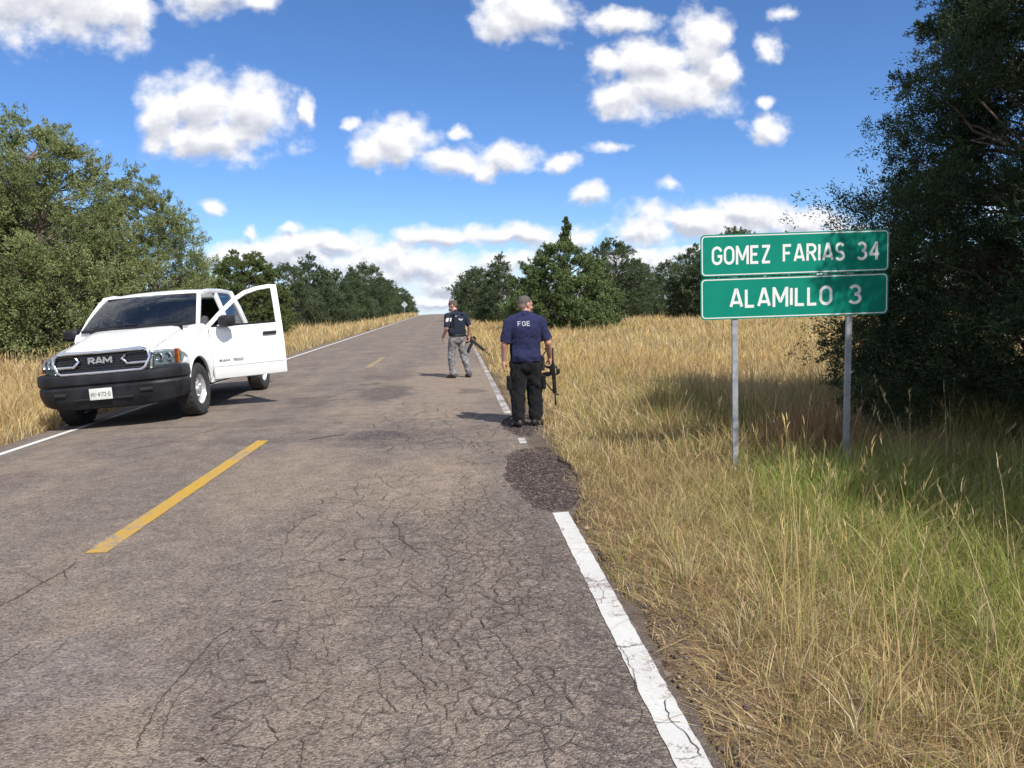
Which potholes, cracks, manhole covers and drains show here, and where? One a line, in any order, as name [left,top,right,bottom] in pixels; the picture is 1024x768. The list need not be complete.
crack [370,401,503,466]
crack [0,561,77,605]
crack [83,467,702,768]
